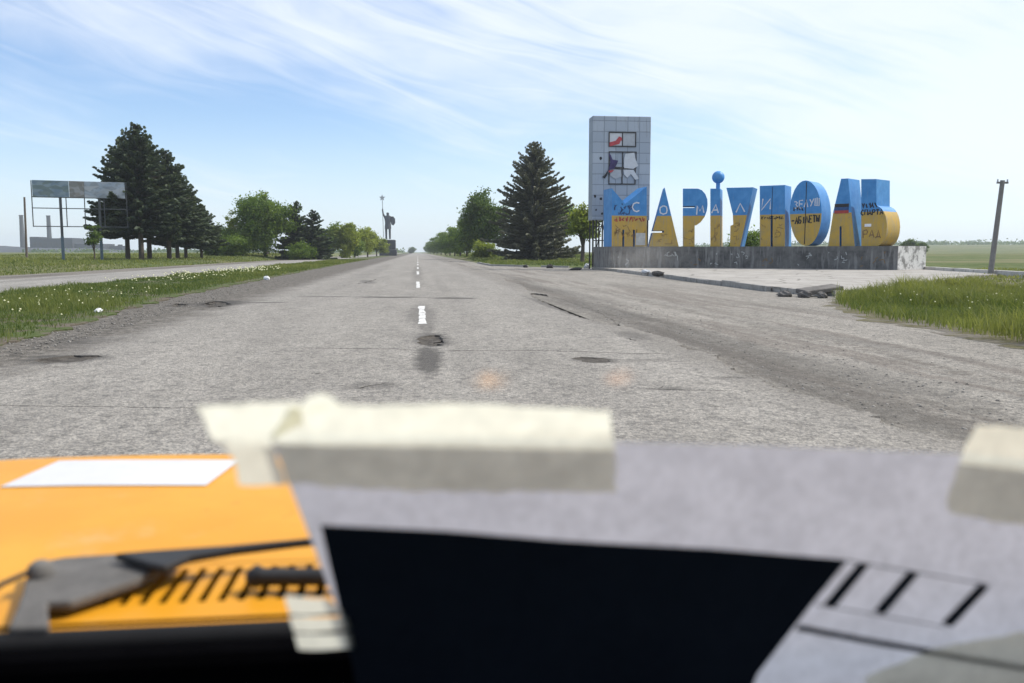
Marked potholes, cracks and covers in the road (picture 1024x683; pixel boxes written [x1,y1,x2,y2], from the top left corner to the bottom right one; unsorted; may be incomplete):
pothole [416,335,444,346]
pothole [34,355,102,363]
